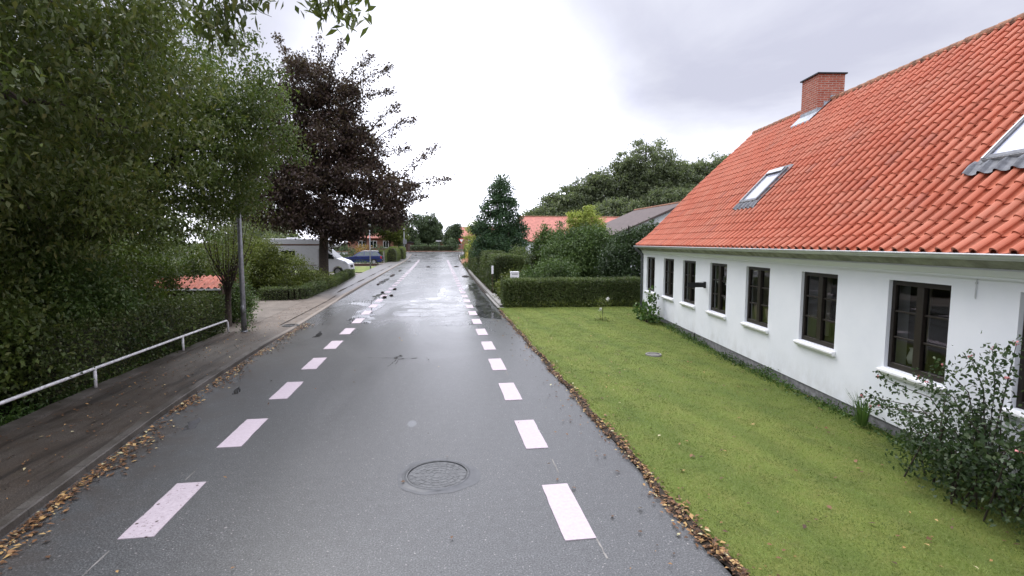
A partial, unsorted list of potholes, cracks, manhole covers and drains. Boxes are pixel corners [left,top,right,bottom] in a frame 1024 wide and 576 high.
manhole cover [397,458,480,495]
